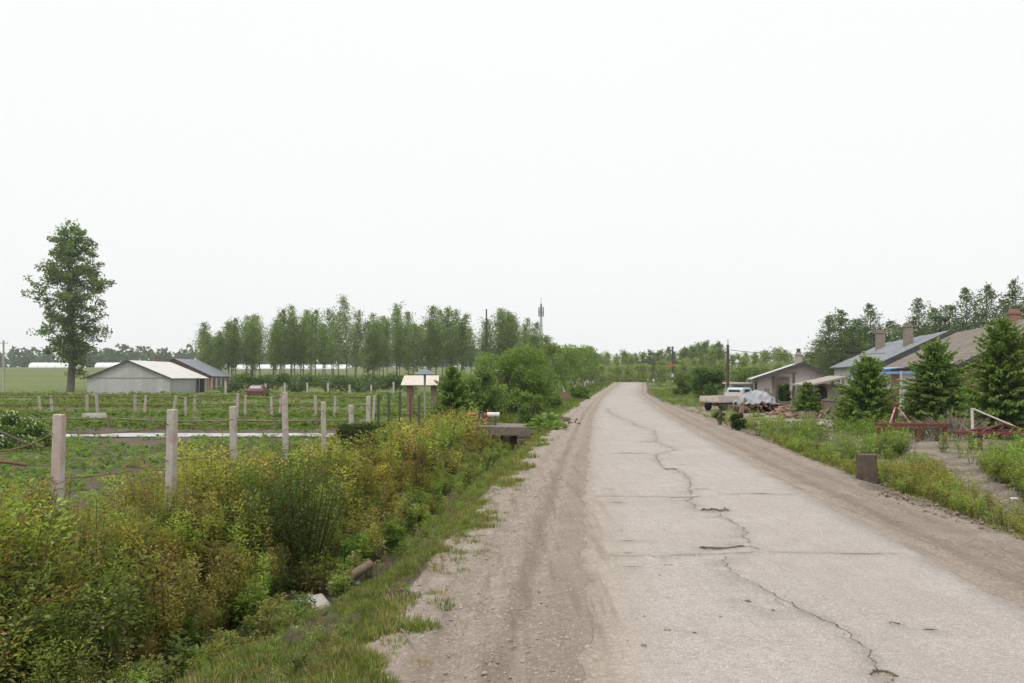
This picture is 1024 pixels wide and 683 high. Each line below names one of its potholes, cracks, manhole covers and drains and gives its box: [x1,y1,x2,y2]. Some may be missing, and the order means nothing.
crack [722,556,879,671]
